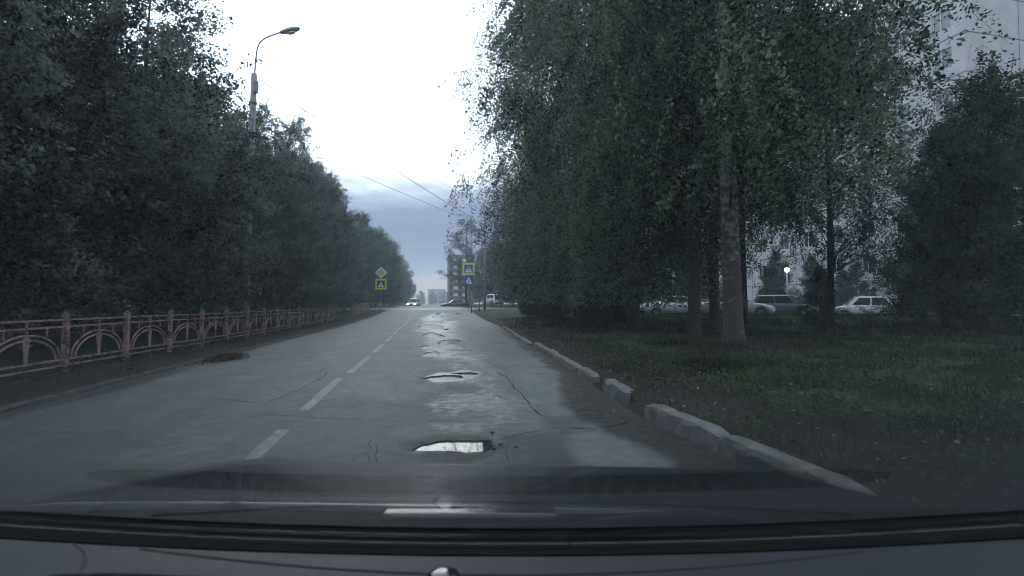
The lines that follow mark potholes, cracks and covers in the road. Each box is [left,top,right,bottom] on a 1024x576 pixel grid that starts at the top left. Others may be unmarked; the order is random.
pothole [412,440,486,453]
crack [190,367,472,422]
crack [492,371,628,462]
